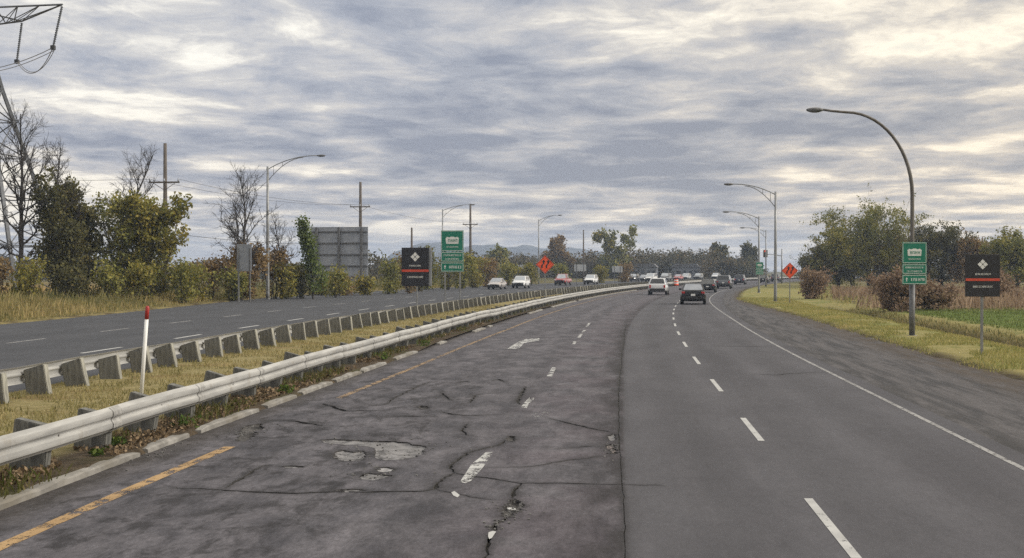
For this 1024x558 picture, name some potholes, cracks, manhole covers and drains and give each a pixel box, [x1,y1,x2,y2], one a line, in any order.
crack [182,381,625,500]
pothole [499,499,525,519]
pothole [322,439,426,460]
crack [484,517,507,558]
pothole [236,423,264,442]
